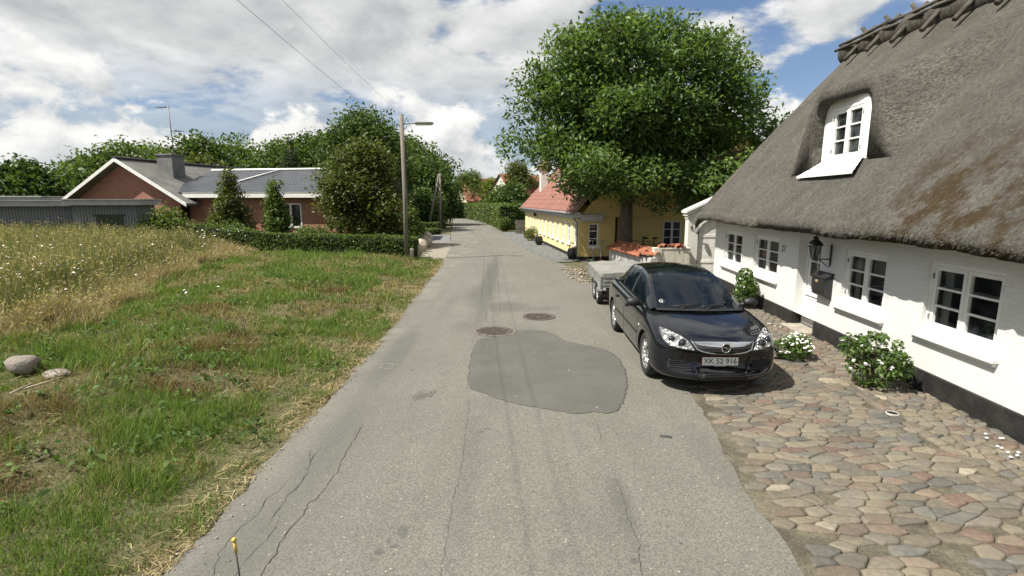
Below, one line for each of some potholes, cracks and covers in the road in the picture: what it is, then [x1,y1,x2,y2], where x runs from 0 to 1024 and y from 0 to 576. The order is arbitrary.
manhole cover [476,326,513,336]
crack [212,423,364,576]
